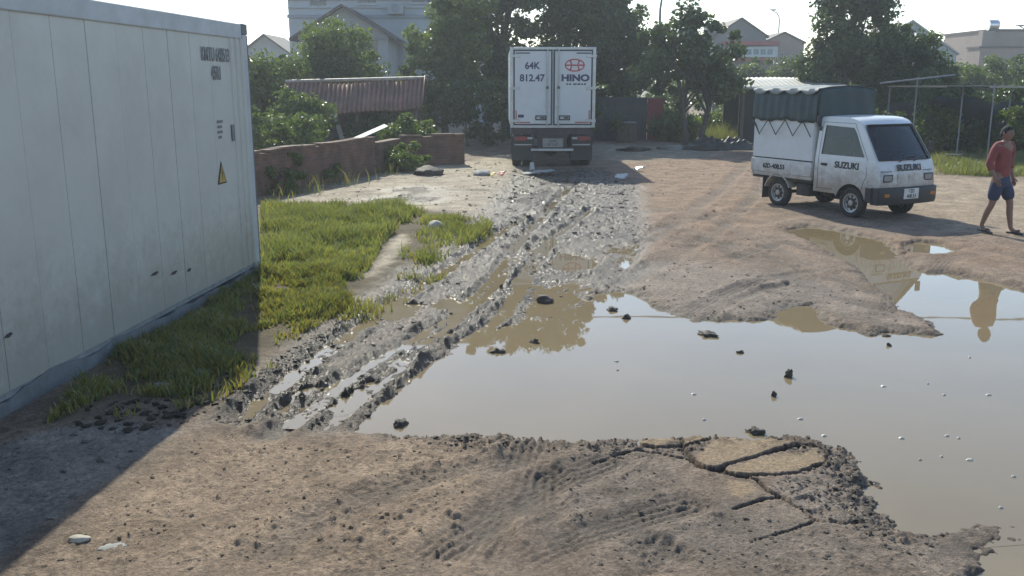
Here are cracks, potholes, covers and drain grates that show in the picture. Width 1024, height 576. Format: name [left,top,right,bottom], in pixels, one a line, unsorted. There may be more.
pothole [355,224,1024,547]
pothole [309,372,387,417]
pothole [272,377,328,414]
